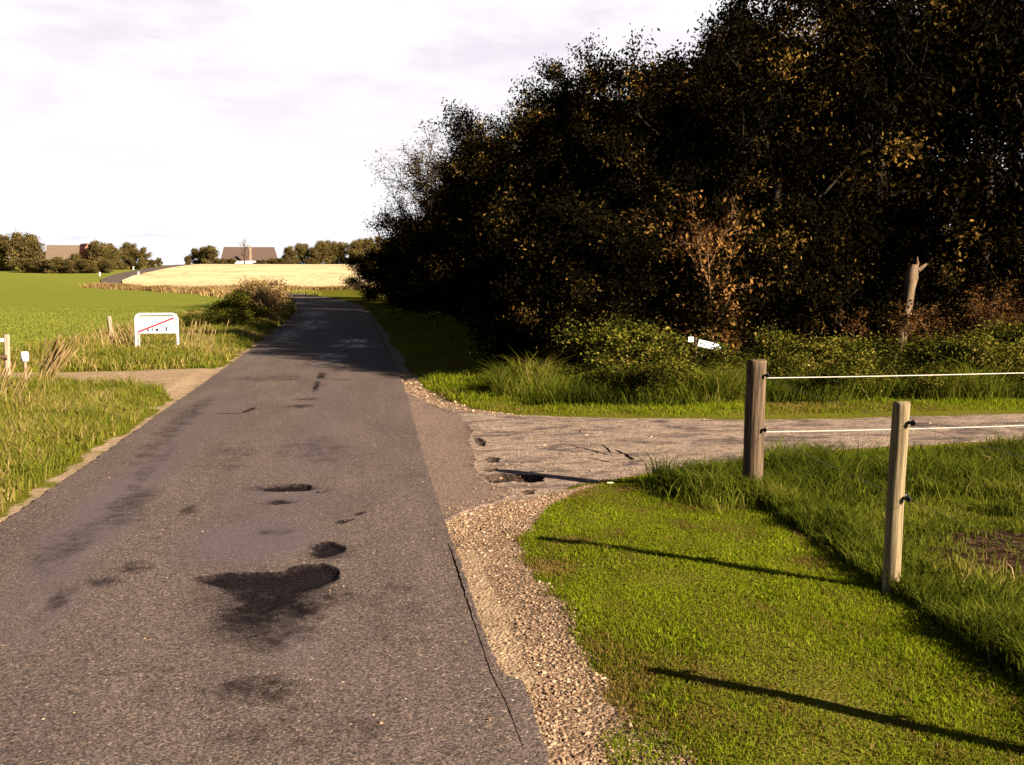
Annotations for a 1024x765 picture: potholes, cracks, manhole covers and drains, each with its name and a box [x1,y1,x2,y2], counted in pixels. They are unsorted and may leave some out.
pothole [484,473,546,483]
crack [448,544,523,746]
pothole [306,540,348,560]
crack [569,444,634,463]
pothole [190,563,341,619]
pothole [255,484,315,492]
